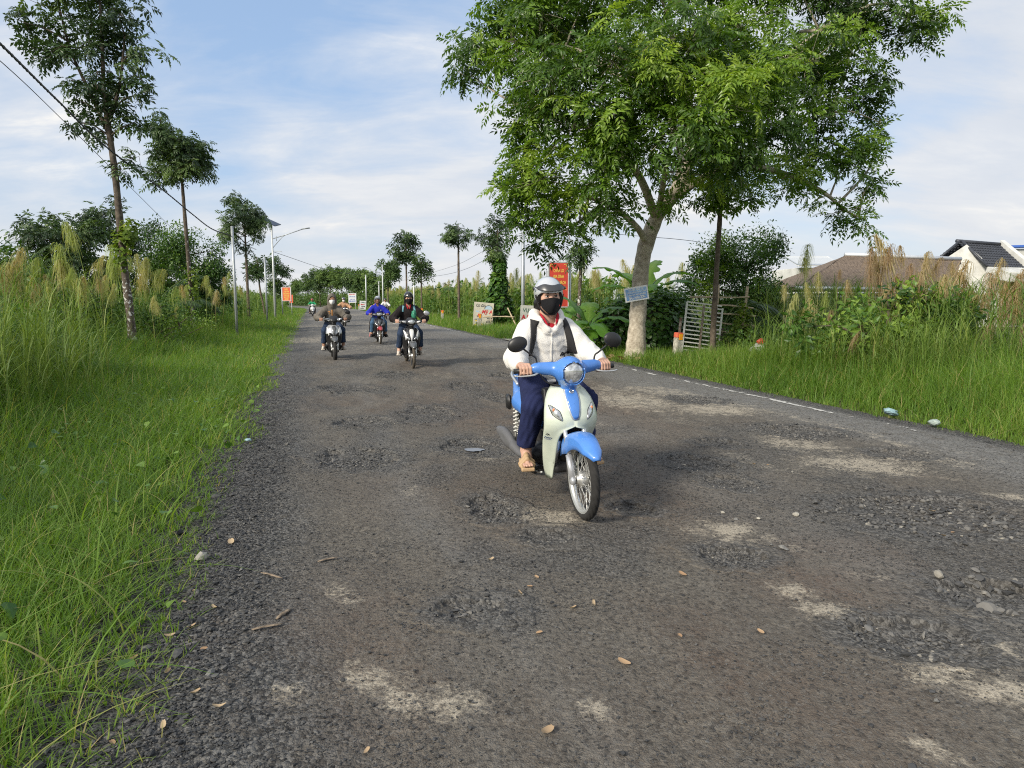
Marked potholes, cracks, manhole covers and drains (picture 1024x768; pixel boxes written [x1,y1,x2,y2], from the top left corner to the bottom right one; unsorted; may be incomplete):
pothole [450,486,534,530]
pothole [667,539,794,575]
pothole [644,452,759,478]
pothole [426,435,517,460]
pothole [808,603,1024,675]
pothole [396,586,538,638]
pothole [305,383,395,395]
pothole [742,422,861,442]
pothole [895,567,1024,626]
pothole [291,442,417,475]
pothole [800,486,1024,553]
pothole [320,415,406,430]
